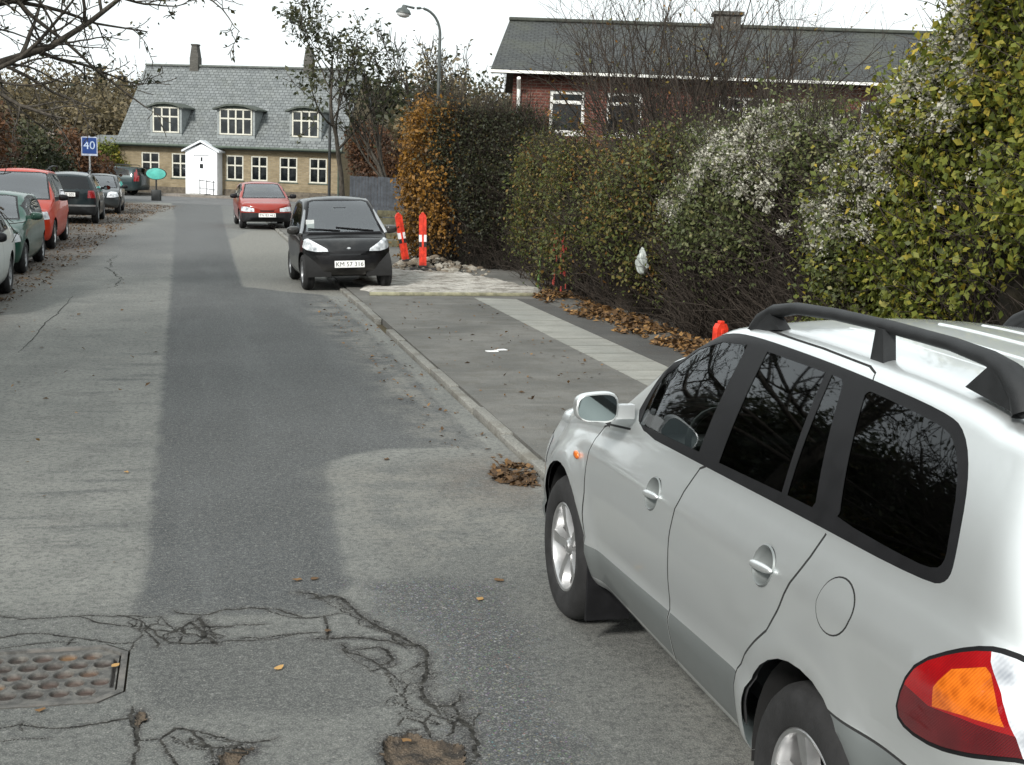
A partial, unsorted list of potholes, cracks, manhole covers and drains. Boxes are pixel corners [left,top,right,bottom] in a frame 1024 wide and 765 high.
manhole cover [0,645,128,709]
pothole [379,732,466,765]
pothole [134,711,148,729]
crack [0,592,482,765]
pothole [217,747,254,765]
crack [20,255,124,351]
